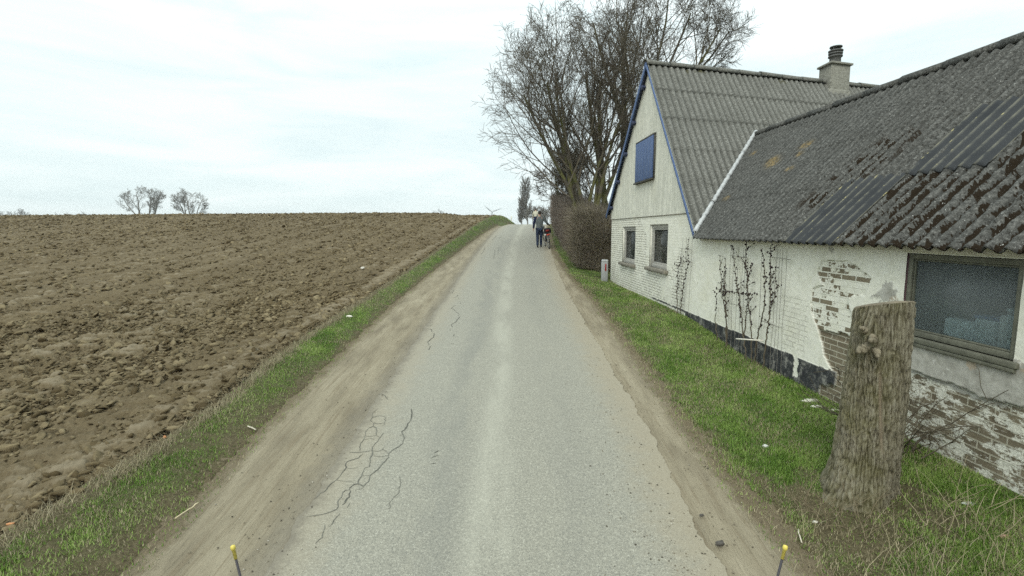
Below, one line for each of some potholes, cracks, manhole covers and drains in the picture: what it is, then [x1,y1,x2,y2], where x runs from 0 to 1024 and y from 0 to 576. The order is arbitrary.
crack [308,409,413,544]
